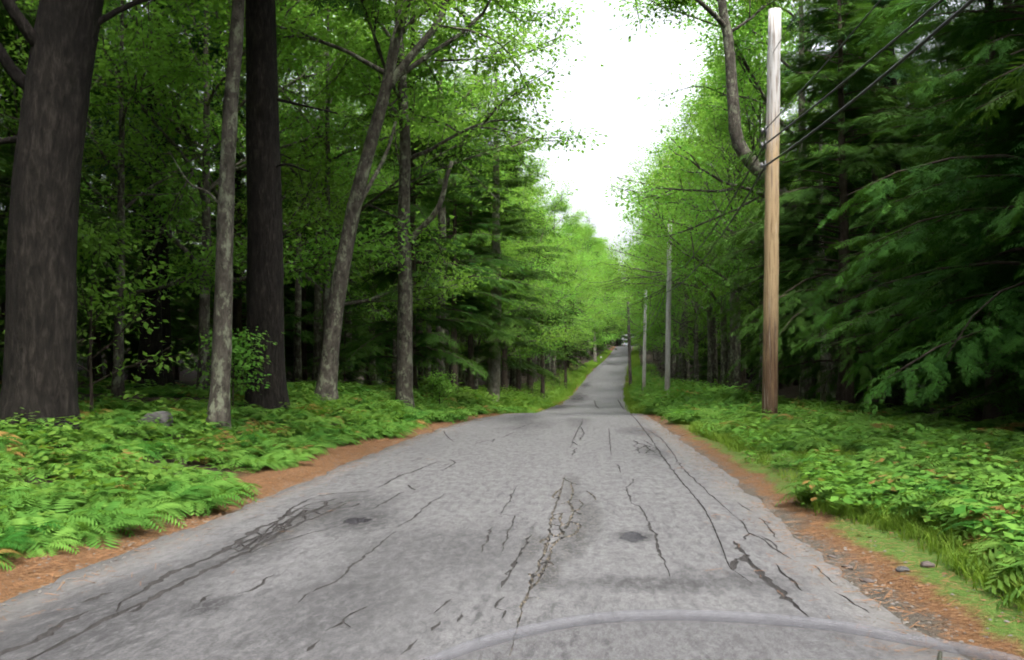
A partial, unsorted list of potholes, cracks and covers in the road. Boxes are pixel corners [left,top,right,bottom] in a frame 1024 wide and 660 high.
crack [481,476,596,656]
crack [608,400,869,617]
crack [570,401,599,455]
crack [0,458,456,660]
